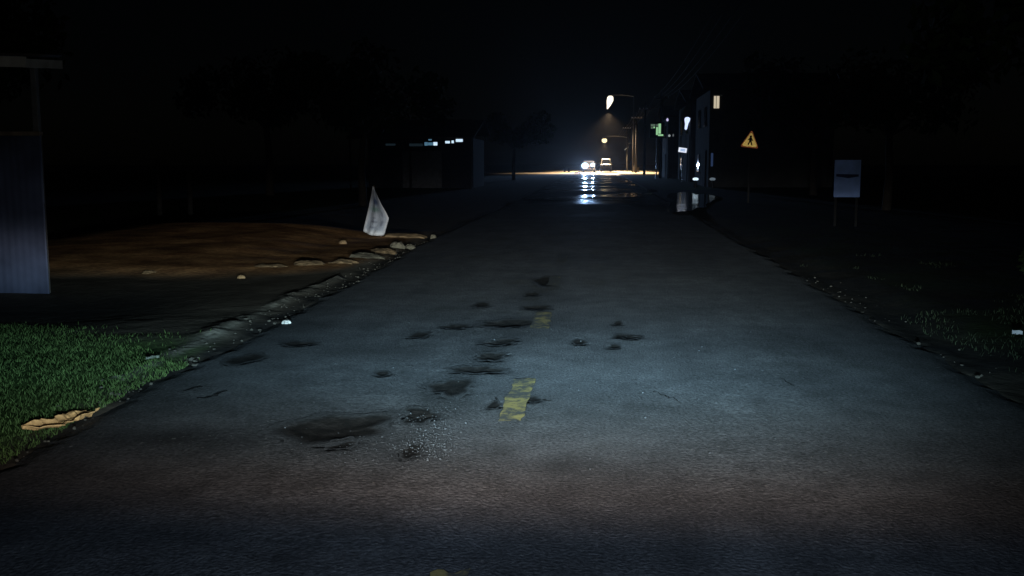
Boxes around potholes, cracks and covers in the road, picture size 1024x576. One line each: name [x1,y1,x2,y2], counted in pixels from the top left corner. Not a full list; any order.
pothole [475,337,522,346]
pothole [472,318,533,329]
pothole [256,411,410,448]
pothole [420,377,477,399]
pothole [530,275,554,288]
pothole [395,443,428,461]
pothole [443,365,512,374]
pothole [472,351,509,362]
pothole [219,353,270,366]
pothole [391,406,448,425]
